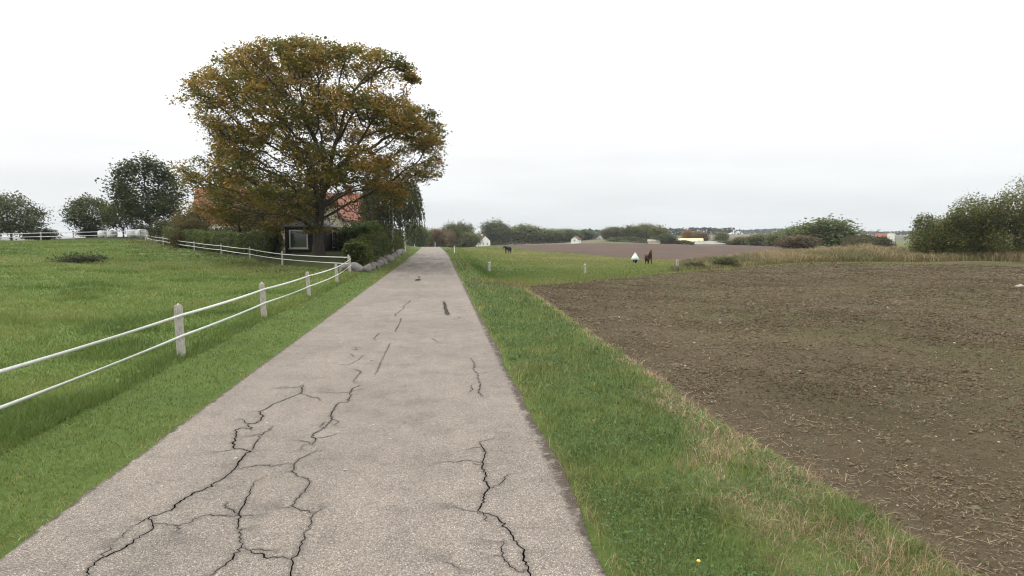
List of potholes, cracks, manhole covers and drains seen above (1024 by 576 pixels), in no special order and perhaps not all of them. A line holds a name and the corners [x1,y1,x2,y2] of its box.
crack [448,439,531,576]
crack [86,385,321,576]
crack [299,301,410,449]
